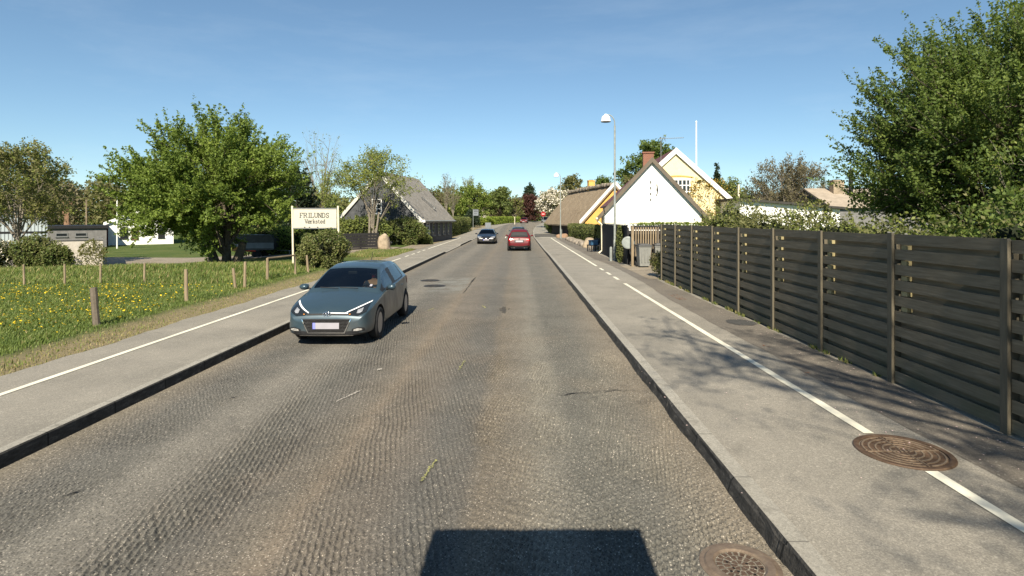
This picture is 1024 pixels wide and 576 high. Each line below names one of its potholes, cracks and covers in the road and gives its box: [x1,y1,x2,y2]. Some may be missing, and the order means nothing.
manhole cover [699,543,783,576]
manhole cover [853,434,958,471]
